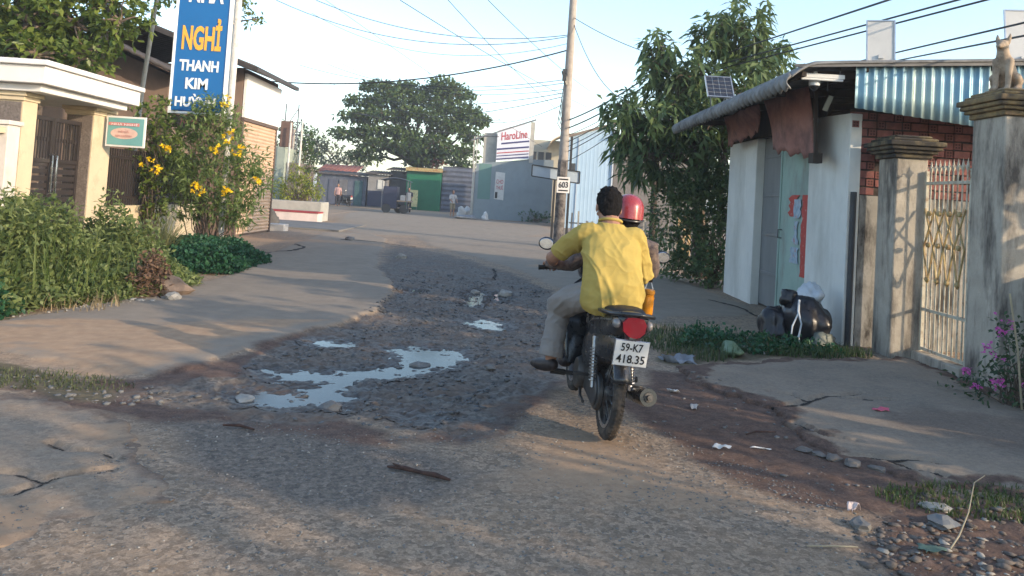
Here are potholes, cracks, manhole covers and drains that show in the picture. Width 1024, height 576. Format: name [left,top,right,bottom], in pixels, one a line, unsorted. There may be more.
pothole [446,314,520,333]
crack [771,394,873,410]
crack [870,458,943,477]
pothole [215,340,483,415]
pothole [296,336,367,350]
crack [13,444,114,496]
